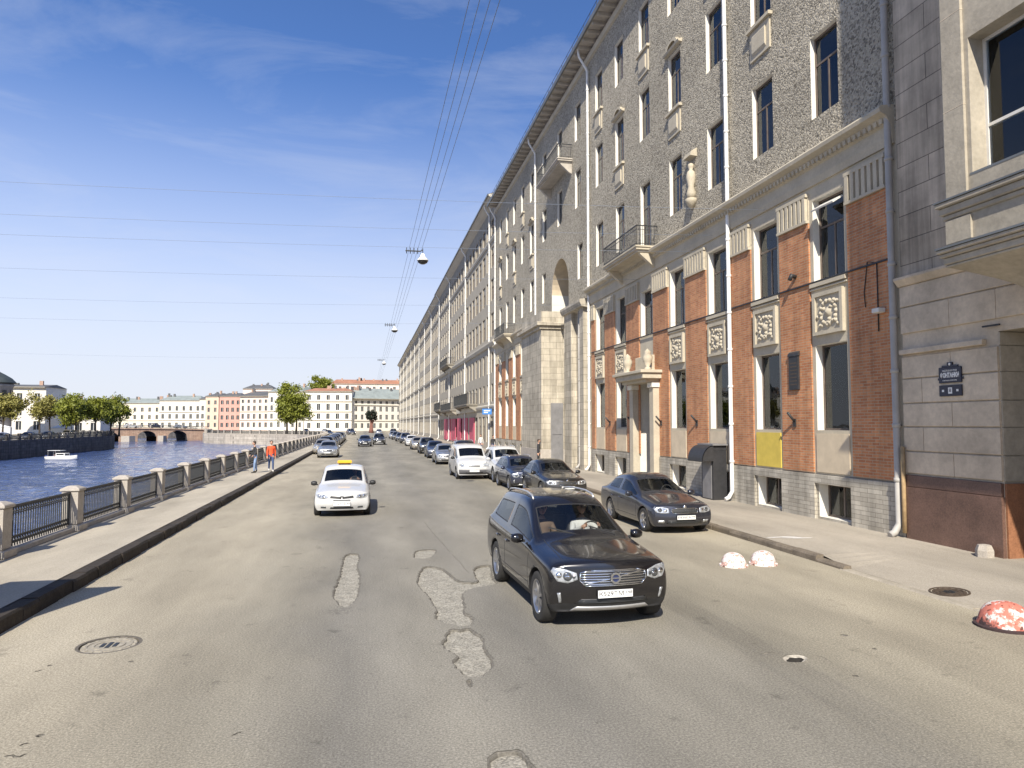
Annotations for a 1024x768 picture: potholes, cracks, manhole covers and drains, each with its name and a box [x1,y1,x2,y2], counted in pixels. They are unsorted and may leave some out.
pothole [416,565,497,626]
pothole [441,628,494,677]
manhole cover [75,636,143,654]
pothole [487,750,536,768]
pothole [413,549,437,558]
pothole [332,554,361,607]
manhole cover [928,587,971,599]
